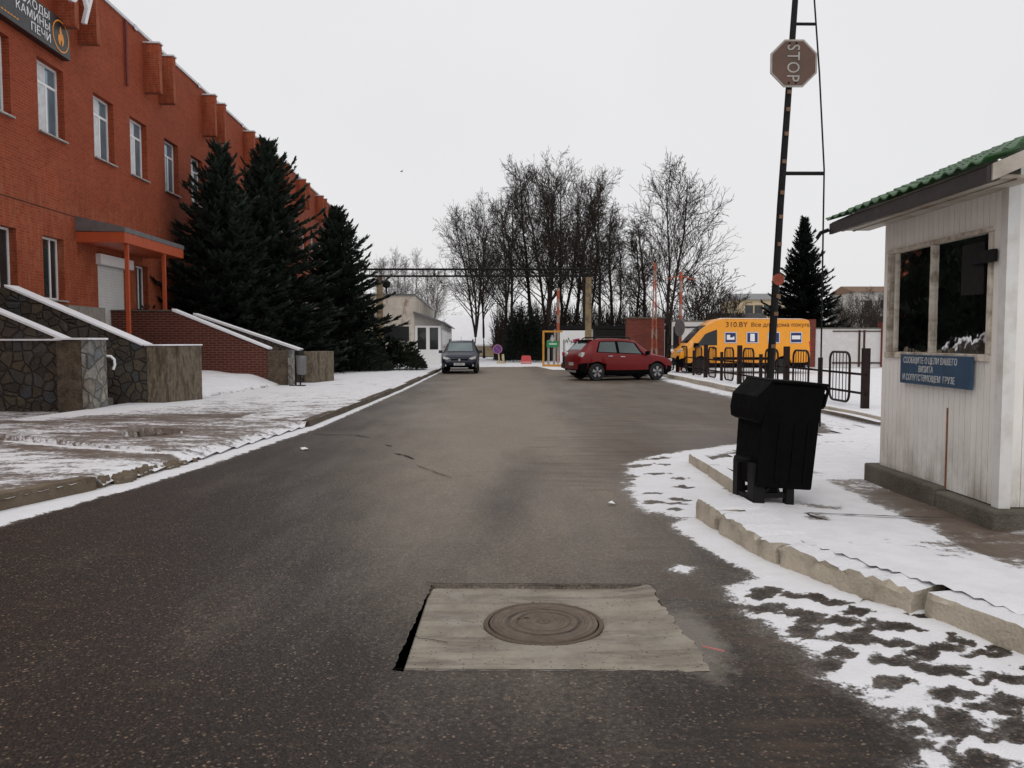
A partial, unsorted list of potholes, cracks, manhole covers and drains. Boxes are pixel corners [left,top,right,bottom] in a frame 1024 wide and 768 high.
manhole cover [484,603,604,646]
